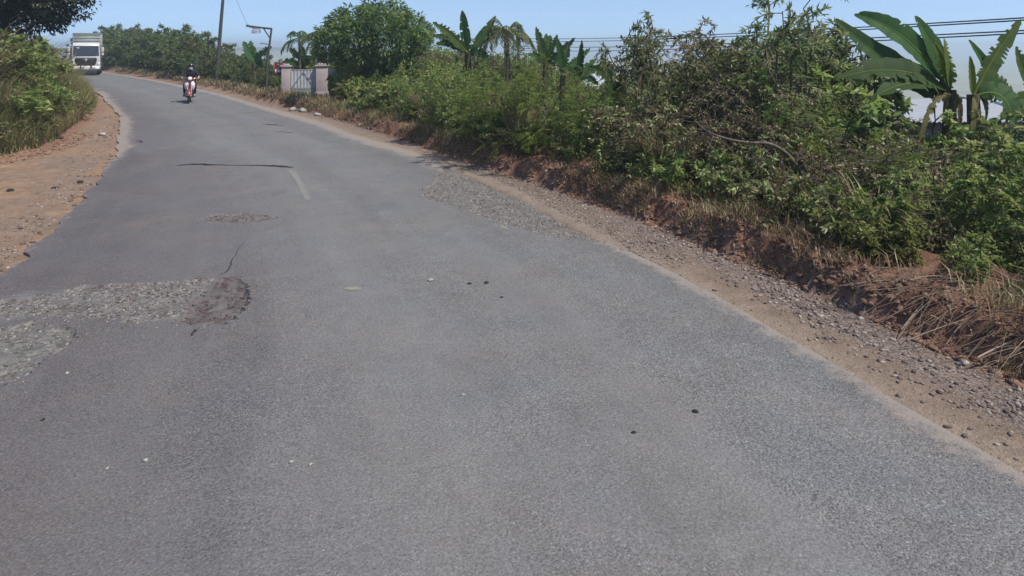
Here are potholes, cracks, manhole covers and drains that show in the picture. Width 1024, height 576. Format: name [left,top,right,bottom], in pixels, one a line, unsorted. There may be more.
pothole [201,211,289,225]
pothole [0,273,281,334]
